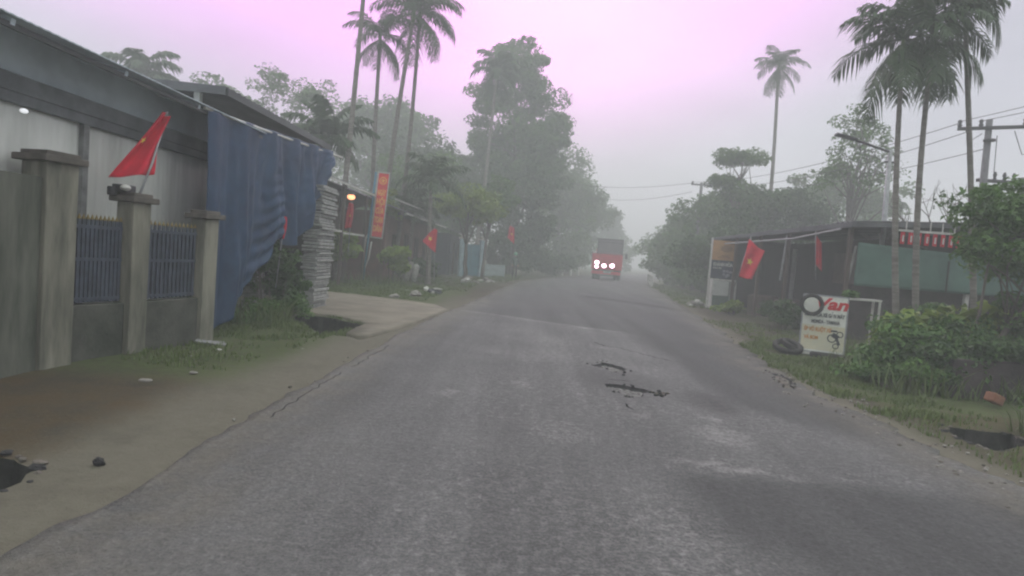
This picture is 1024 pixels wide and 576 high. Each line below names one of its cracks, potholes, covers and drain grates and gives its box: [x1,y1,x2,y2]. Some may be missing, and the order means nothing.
crack [270,345,389,418]
